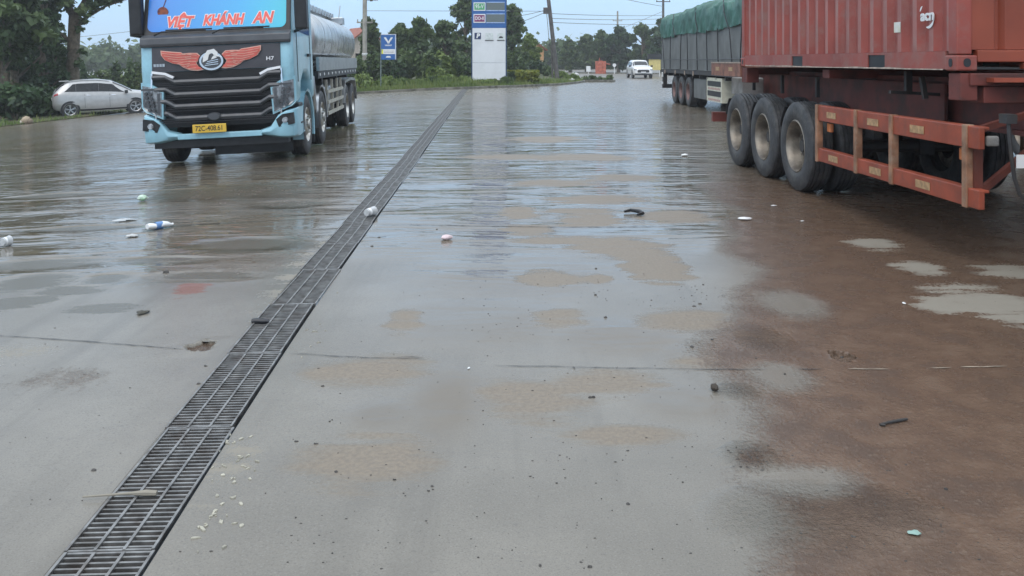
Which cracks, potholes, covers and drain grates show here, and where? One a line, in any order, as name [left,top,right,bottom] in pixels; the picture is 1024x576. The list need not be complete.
drain grate [388,165,415,173]
drain grate [272,269,341,307]
drain grate [325,223,373,245]
drain grate [165,353,281,429]
drain grate [342,207,383,224]
drain grate [357,193,394,209]
drain grate [227,303,314,356]
drain grate [64,427,234,553]
drain grate [381,173,409,183]
drain grate [45,550,155,576]
